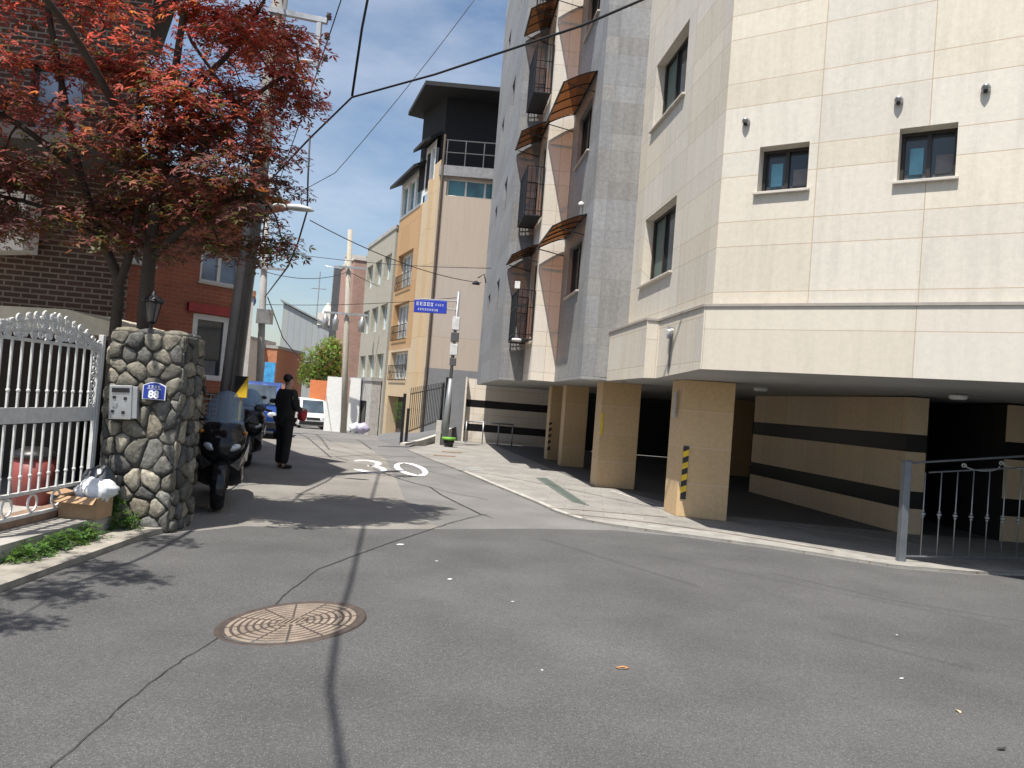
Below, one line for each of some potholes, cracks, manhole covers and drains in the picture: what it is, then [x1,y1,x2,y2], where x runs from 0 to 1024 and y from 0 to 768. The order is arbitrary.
manhole cover [214,601,366,646]
crack [275,439,493,605]
crack [49,637,218,768]
